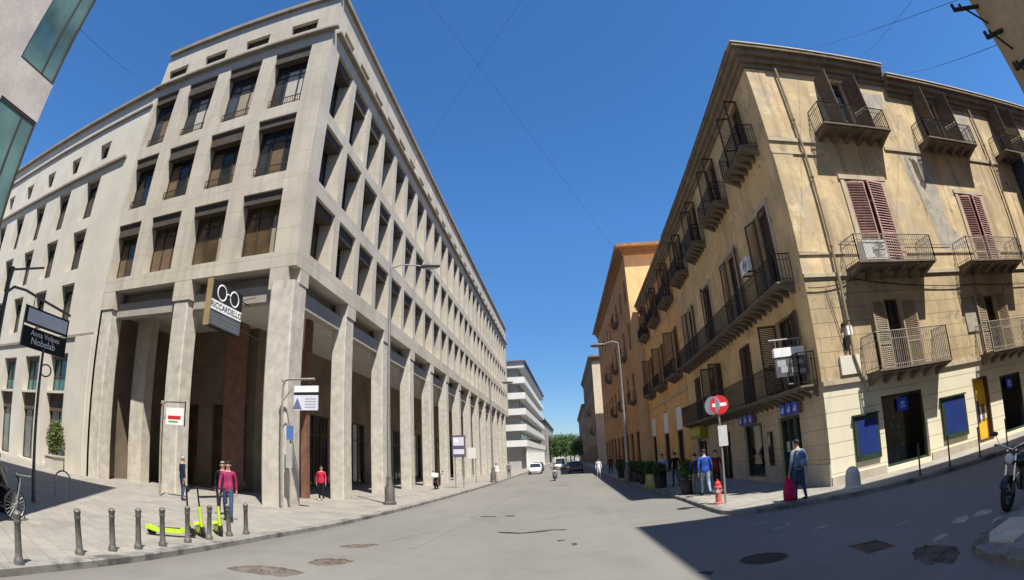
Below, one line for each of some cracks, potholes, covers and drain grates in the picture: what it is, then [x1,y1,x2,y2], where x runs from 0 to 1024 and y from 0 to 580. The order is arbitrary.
pothole [912,545,961,565]
crack [480,515,577,546]
manhole cover [849,539,896,554]
manhole cover [739,552,789,565]
